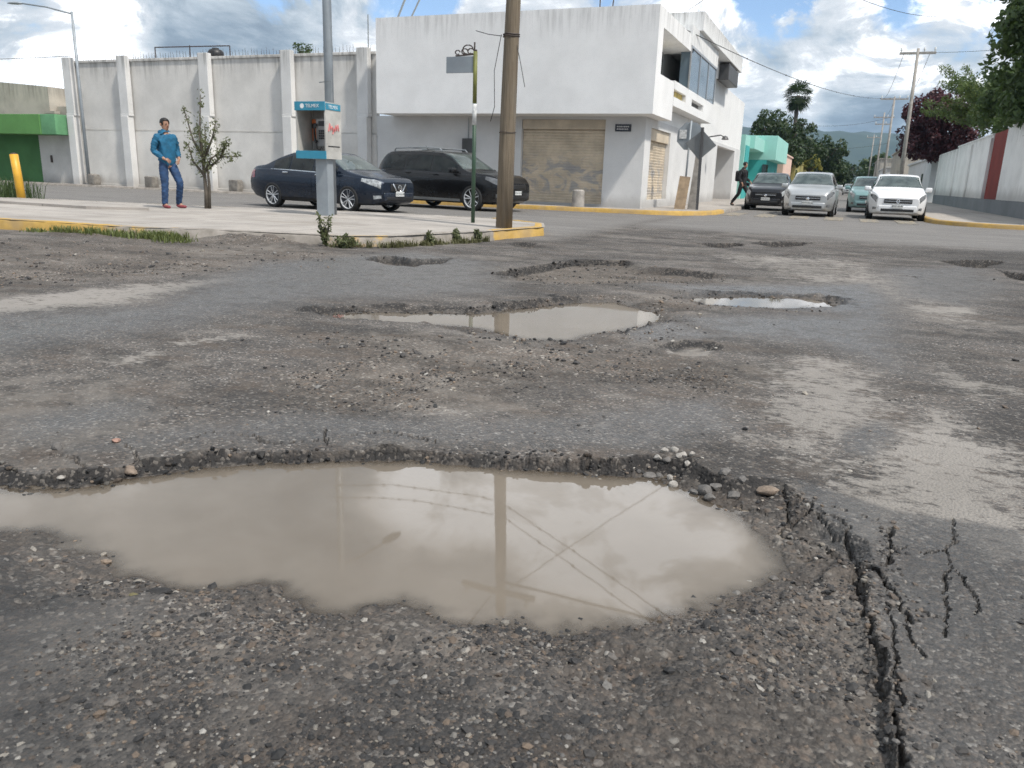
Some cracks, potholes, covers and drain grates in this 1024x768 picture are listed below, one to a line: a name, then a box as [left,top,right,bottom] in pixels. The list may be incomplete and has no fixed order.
pothole [651,289,862,313]
pothole [942,260,1006,269]
crack [784,484,983,768]
pothole [994,270,1024,284]
pothole [364,256,457,268]
pothole [0,444,869,728]
pothole [660,340,722,358]
pothole [299,291,703,350]
pothole [494,259,734,285]
